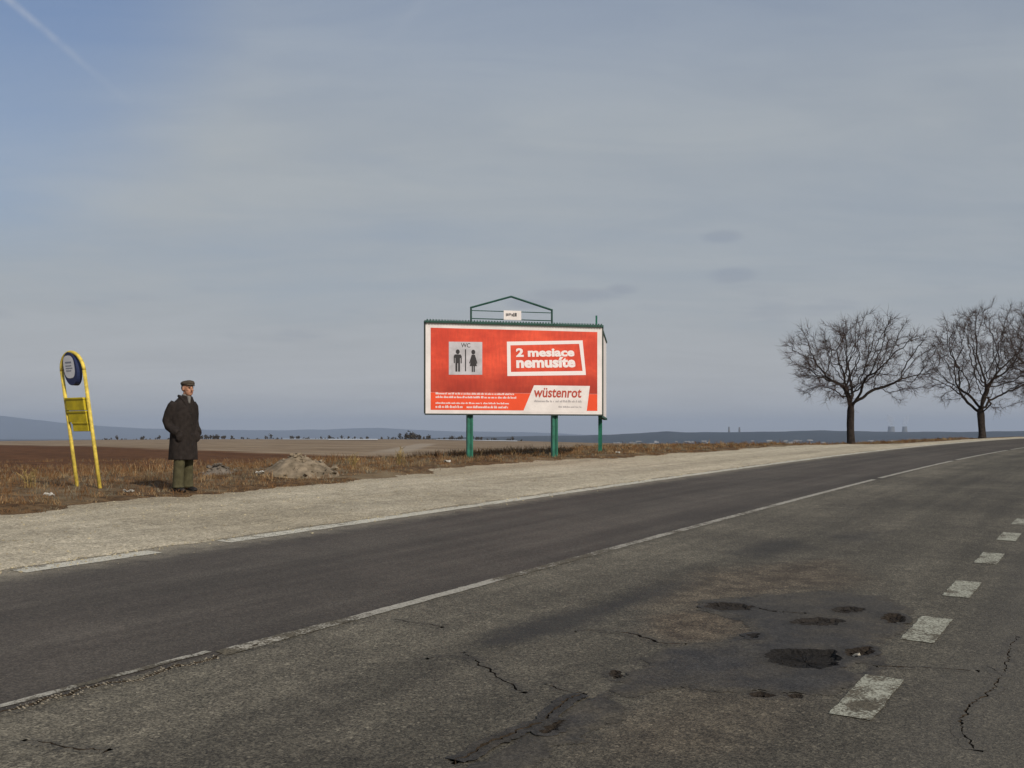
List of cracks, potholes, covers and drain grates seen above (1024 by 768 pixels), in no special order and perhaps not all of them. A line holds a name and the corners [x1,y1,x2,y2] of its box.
pothole [836,645,882,659]
crack [878,636,1024,751]
crack [575,628,685,646]
crack [19,737,112,754]
pothole [601,669,628,680]
crack [427,652,588,765]
pothole [783,616,851,627]
pothole [697,601,760,612]
pothole [741,689,783,700]
pothole [758,647,849,671]
pothole [876,612,913,625]
pothole [782,692,812,701]
